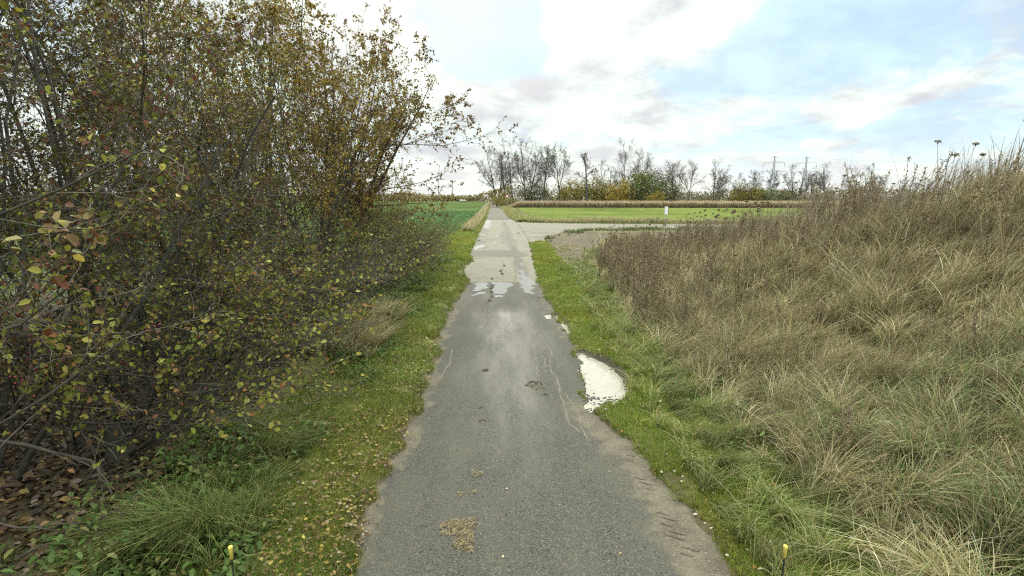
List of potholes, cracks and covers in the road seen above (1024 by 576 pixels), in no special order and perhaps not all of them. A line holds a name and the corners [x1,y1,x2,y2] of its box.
crack [528,322,590,440]
pothole [525,381,545,391]
